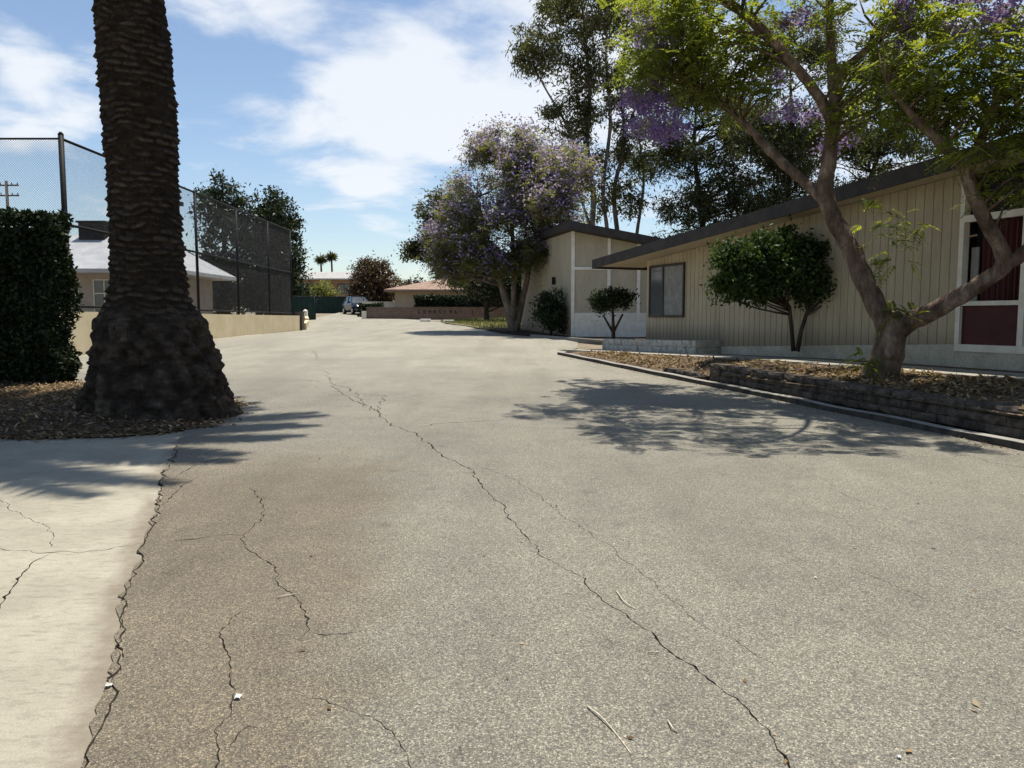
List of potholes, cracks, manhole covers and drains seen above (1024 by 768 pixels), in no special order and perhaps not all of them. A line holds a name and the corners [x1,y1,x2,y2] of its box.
crack [214,611,256,768]
crack [0,445,227,768]
crack [297,351,791,768]
crack [176,489,357,636]
